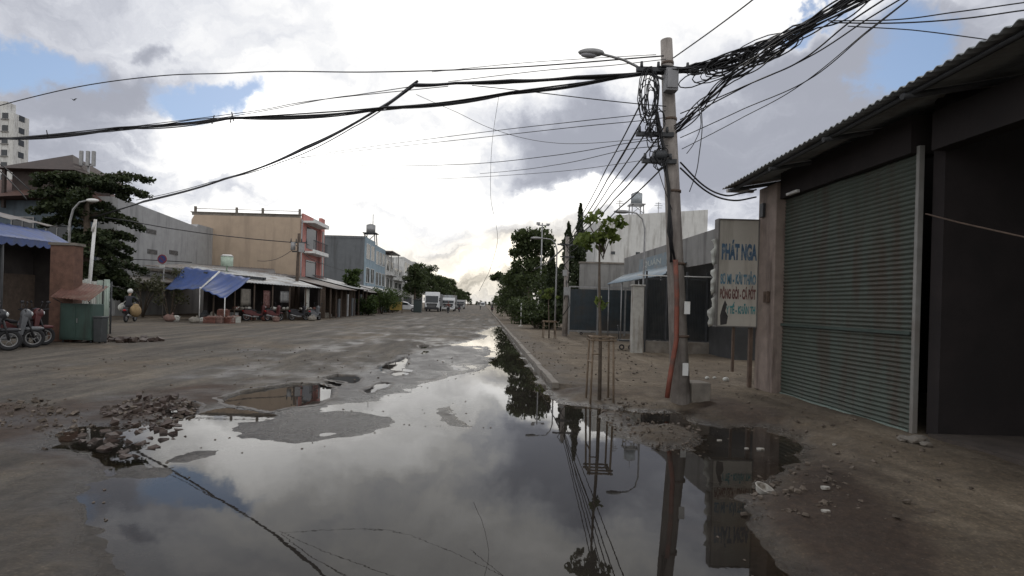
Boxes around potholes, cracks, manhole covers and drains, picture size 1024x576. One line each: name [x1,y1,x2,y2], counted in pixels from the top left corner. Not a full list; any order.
pothole [212,382,339,413]
pothole [152,400,206,423]
pothole [317,373,365,386]
